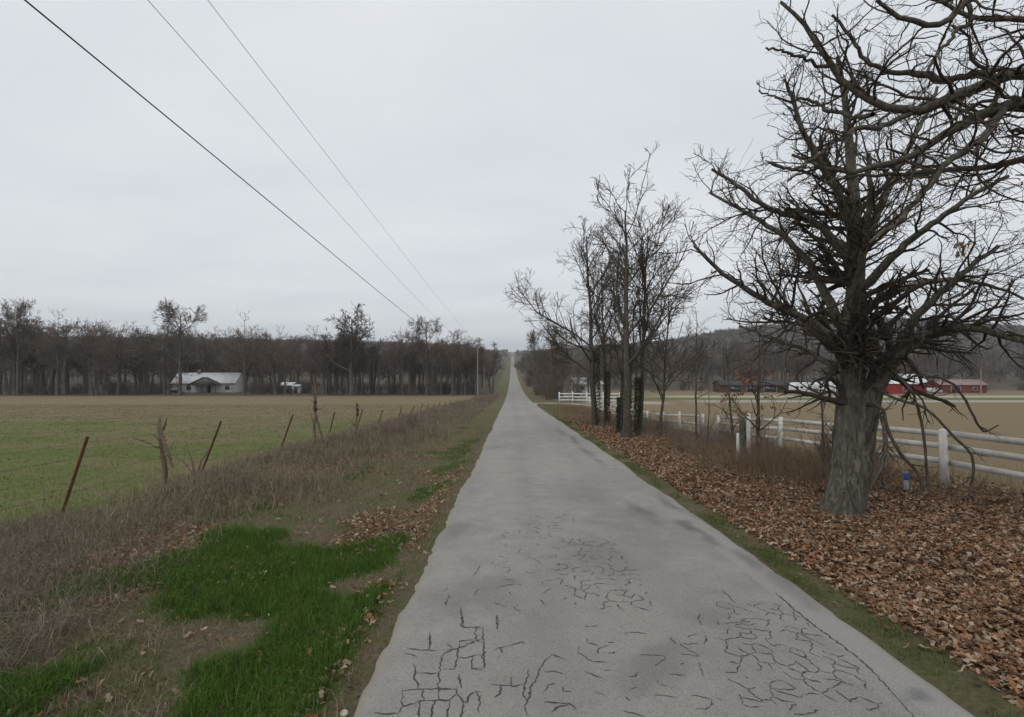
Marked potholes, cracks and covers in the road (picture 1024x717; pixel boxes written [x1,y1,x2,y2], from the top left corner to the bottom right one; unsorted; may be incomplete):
crack [698,589,914,716]
crack [374,514,724,717]
